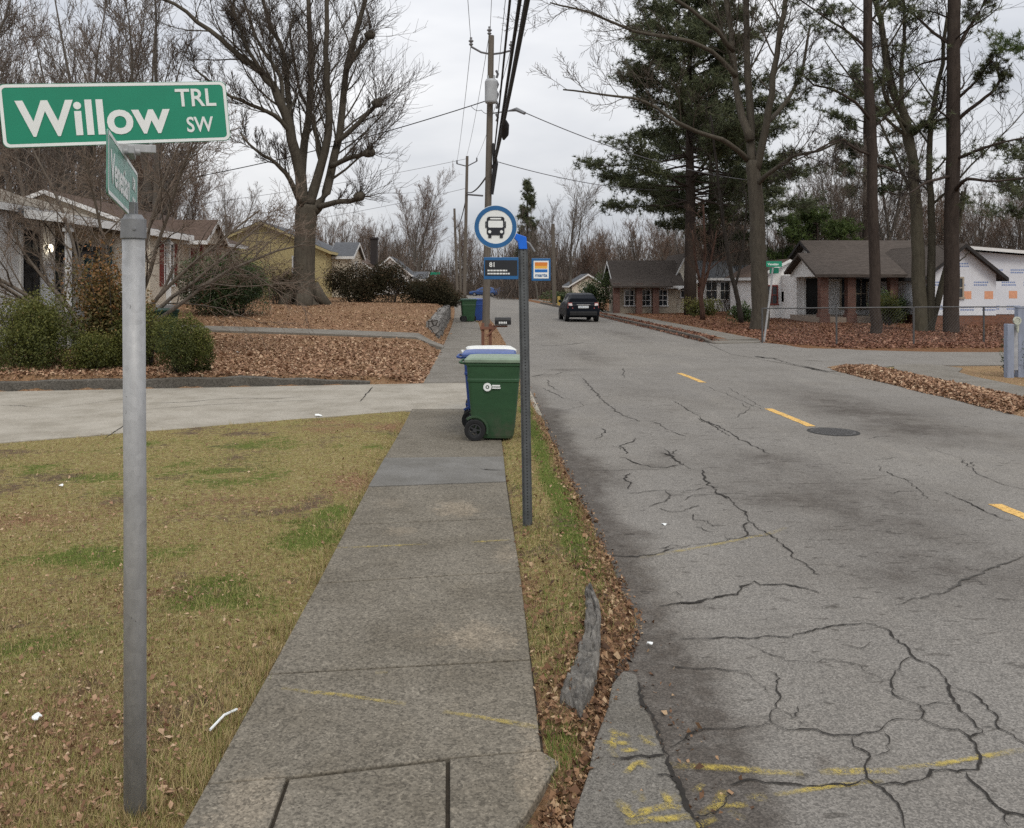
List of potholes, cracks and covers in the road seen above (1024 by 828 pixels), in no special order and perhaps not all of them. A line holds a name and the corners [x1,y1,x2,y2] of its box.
crack [611,622,1024,828]
manhole cover [807,427,860,436]
crack [901,555,1024,604]
crack [531,373,820,606]
